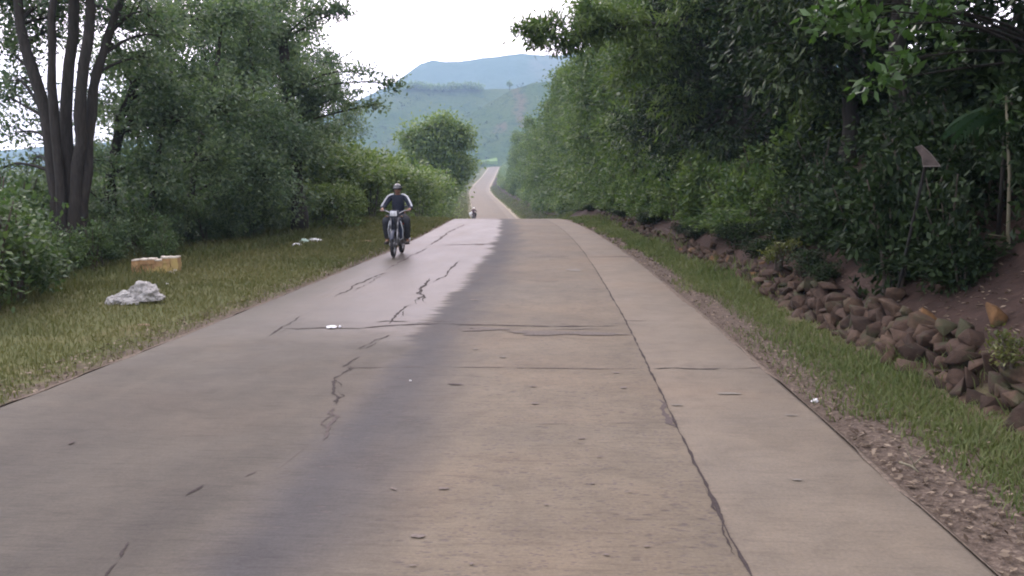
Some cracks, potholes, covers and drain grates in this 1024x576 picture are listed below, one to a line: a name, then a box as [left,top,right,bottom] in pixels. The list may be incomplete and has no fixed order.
crack [272,224,619,466]
crack [105,542,129,576]
